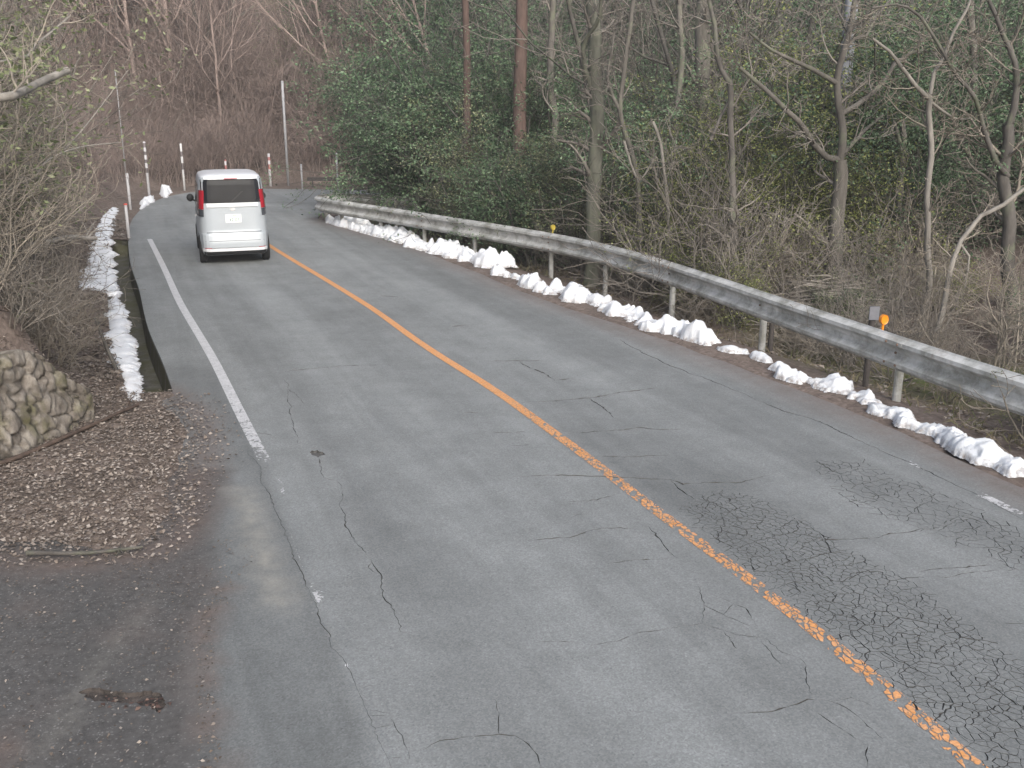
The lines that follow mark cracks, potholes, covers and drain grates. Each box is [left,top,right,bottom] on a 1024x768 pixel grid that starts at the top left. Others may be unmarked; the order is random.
crack [284,370,405,633]
crack [541,388,668,433]
pothole [79,688,166,713]
crack [679,459,1024,768]
crack [530,495,675,563]
crack [422,700,540,763]
